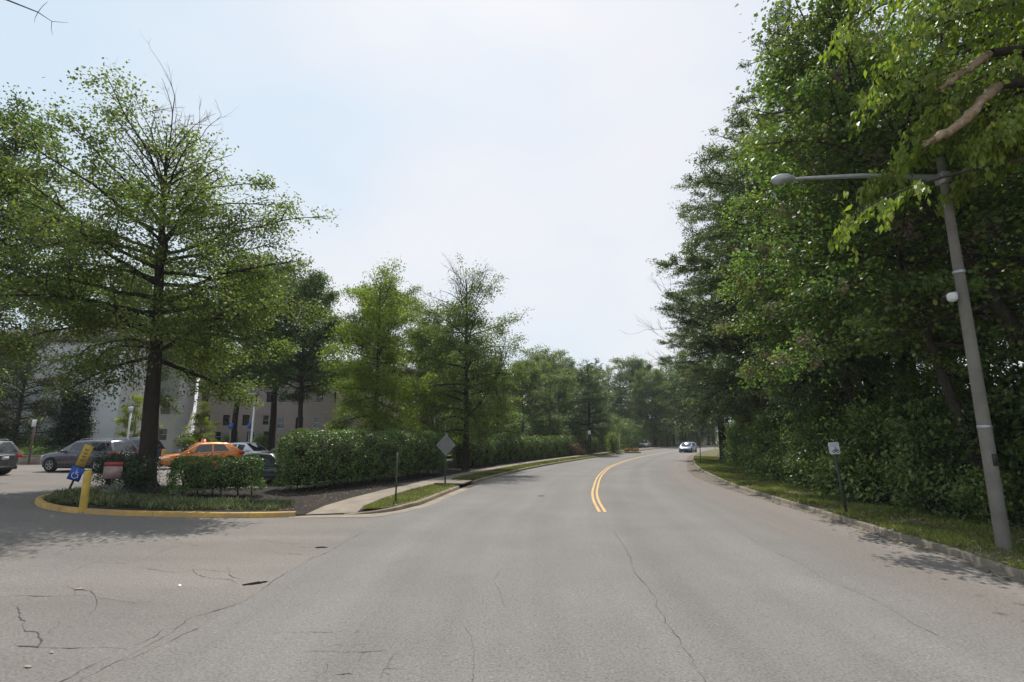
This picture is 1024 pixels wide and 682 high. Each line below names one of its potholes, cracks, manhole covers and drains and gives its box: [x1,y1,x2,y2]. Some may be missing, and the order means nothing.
crack [15,537,197,648]
crack [616,534,706,682]
crack [59,535,357,682]
